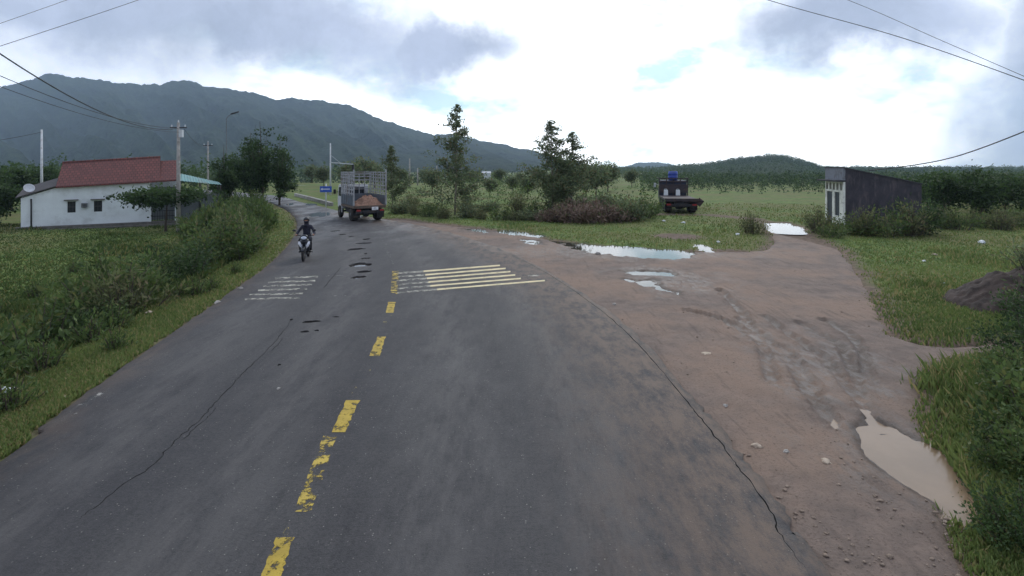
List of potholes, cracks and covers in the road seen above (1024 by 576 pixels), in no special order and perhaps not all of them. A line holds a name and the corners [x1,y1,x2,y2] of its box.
crack [80,316,295,519]
